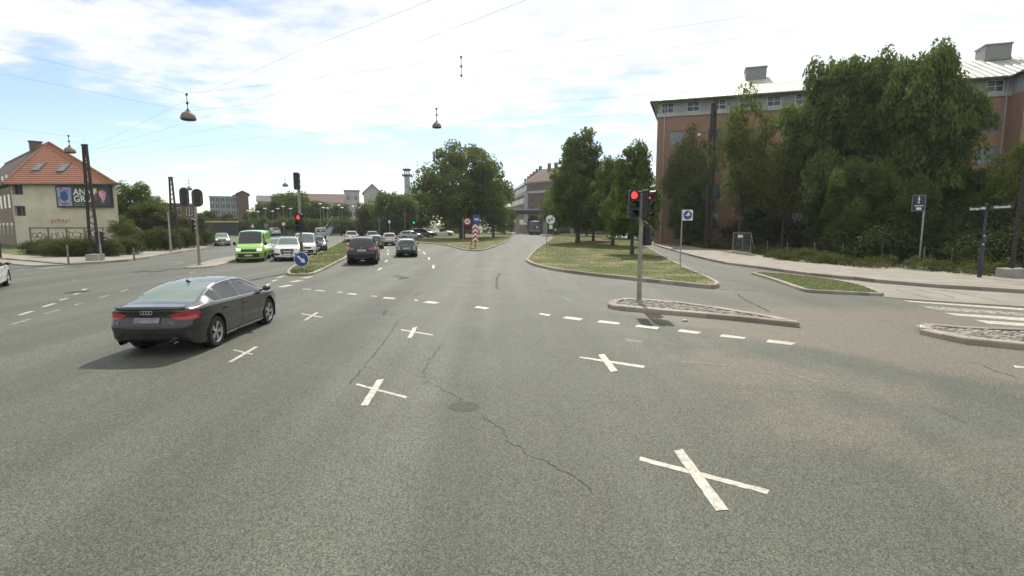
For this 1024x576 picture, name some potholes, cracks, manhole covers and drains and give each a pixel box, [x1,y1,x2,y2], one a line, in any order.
crack [476,410,591,492]
